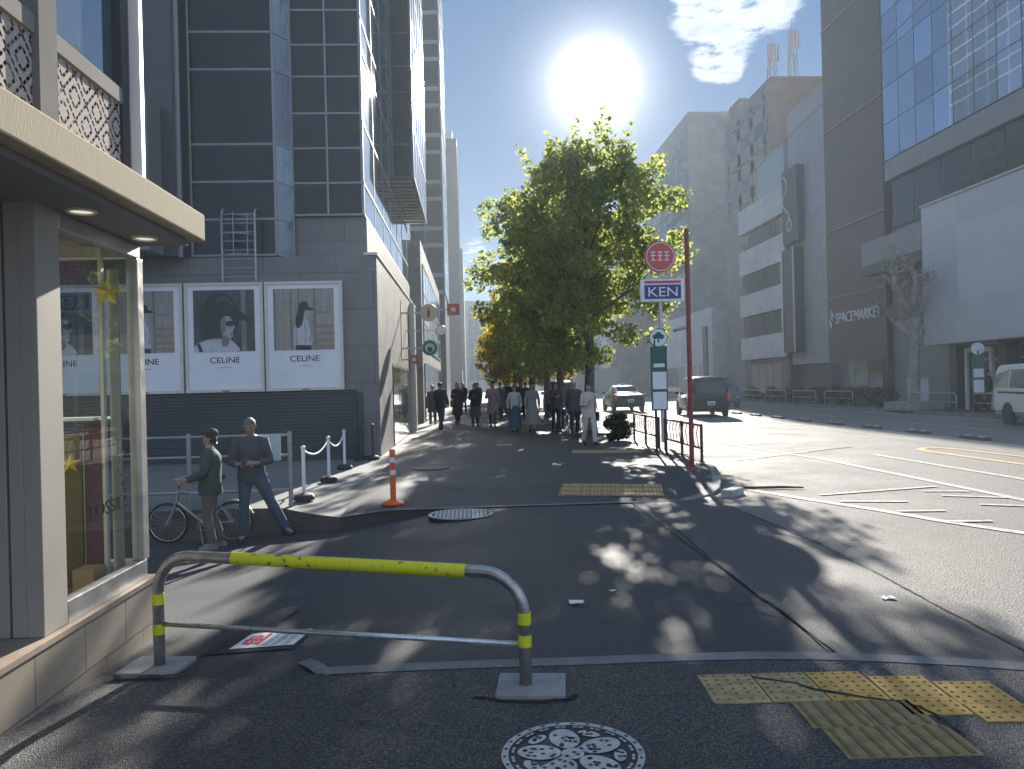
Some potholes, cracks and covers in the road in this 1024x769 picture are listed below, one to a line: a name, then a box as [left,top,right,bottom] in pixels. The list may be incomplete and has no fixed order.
manhole cover [428,508,493,522]
manhole cover [501,722,646,769]
crack [752,676,963,733]
